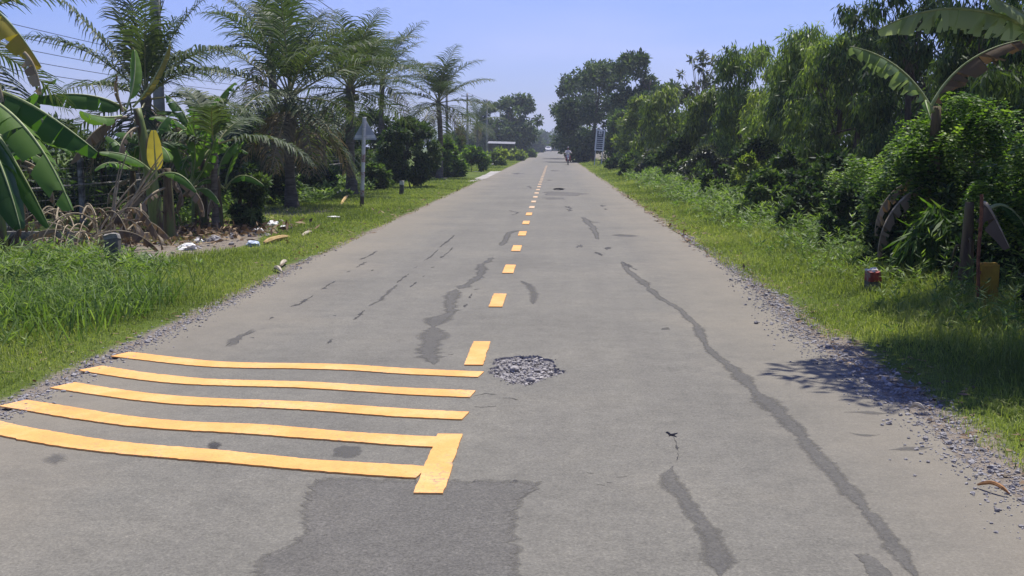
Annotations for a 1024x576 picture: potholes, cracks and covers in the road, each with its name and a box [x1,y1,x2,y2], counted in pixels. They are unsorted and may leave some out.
crack [291,251,376,307]
pothole [487,355,566,387]
crack [397,235,454,287]
